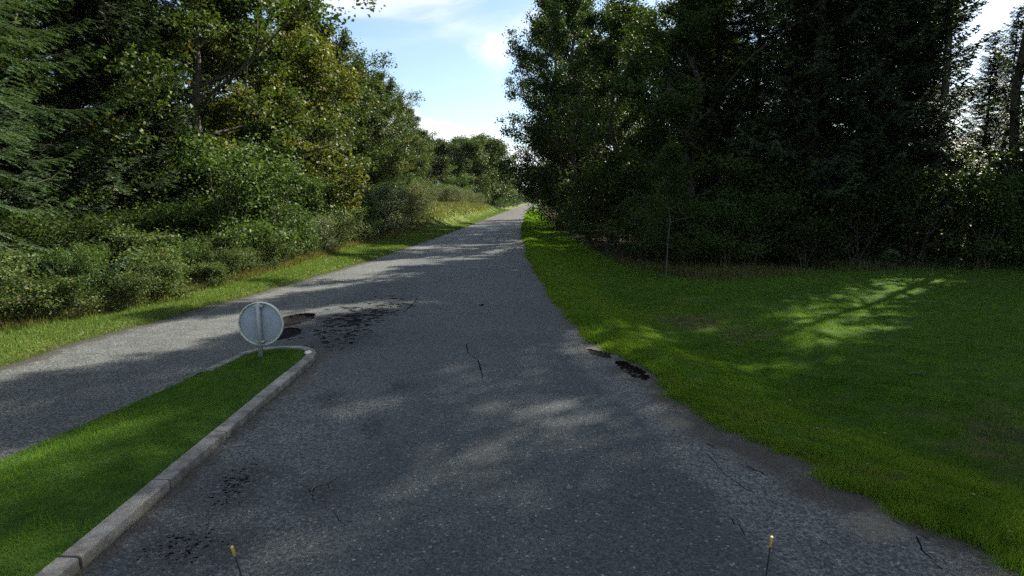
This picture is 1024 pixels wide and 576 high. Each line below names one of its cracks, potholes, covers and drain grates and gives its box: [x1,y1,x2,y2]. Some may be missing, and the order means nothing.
pothole [585,349,612,358]
pothole [277,327,302,340]
crack [704,443,786,508]
crack [882,520,943,571]
pothole [615,361,650,380]
pothole [283,313,316,327]
